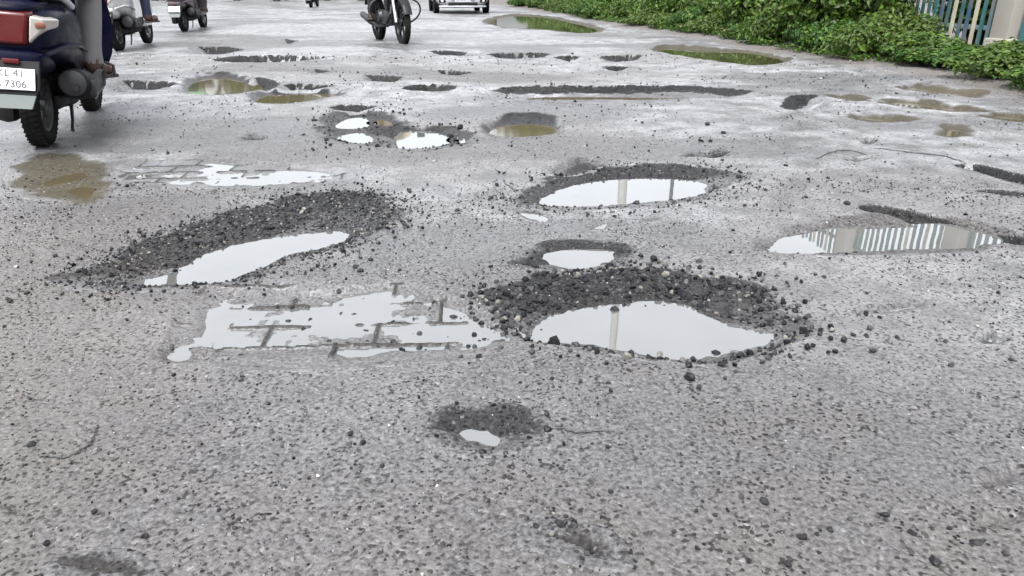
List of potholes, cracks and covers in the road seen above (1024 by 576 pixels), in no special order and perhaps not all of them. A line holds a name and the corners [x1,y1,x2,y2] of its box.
crack [817,148,1024,197]
pothole [481,13,606,33]
pothole [5,176,484,321]
pothole [467,112,575,143]
pothole [398,243,877,392]
pothole [502,235,665,274]
pothole [457,81,775,106]
pothole [248,77,280,93]
pothole [160,278,533,377]
pothole [2,151,115,205]
pothole [403,400,575,459]
